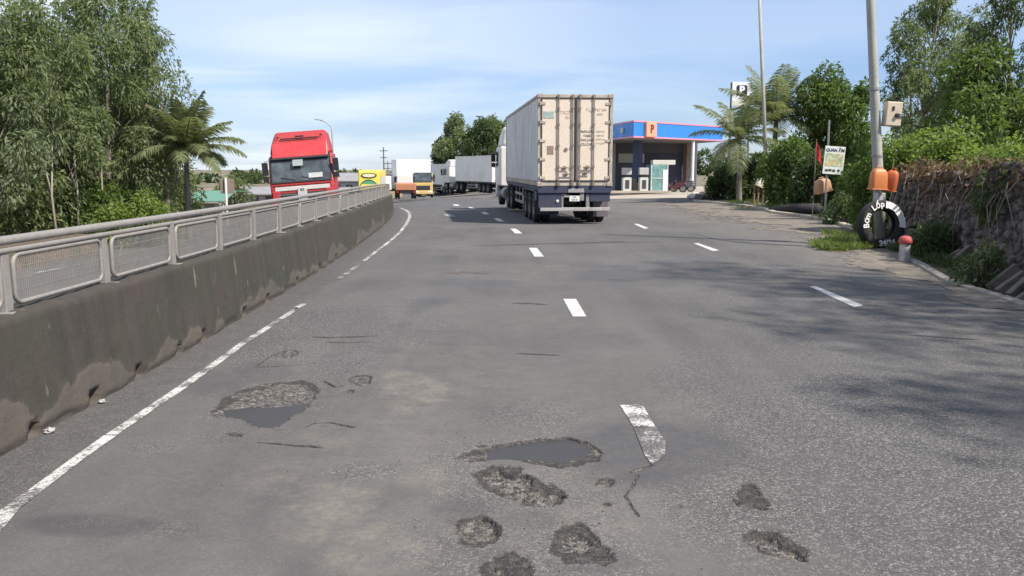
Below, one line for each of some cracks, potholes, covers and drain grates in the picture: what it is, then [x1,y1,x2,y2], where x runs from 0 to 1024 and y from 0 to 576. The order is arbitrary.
pothole [475,549,538,576]
pothole [729,483,774,511]
pothole [452,436,606,470]
pothole [206,379,321,428]
crack [623,464,654,517]
pothole [347,375,374,386]
pothole [592,477,617,488]
pothole [469,464,570,508]
pothole [269,349,300,358]
pothole [540,520,619,567]
crack [256,422,356,449]
pothole [451,513,504,548]
